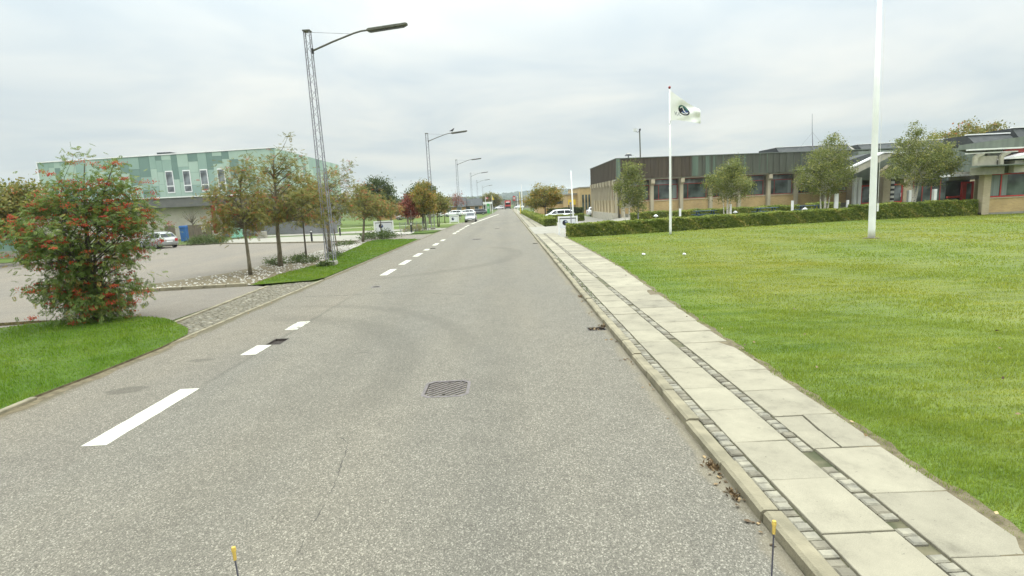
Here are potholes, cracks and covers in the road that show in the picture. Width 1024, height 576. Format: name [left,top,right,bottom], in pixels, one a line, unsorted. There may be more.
crack [288,437,348,569]
